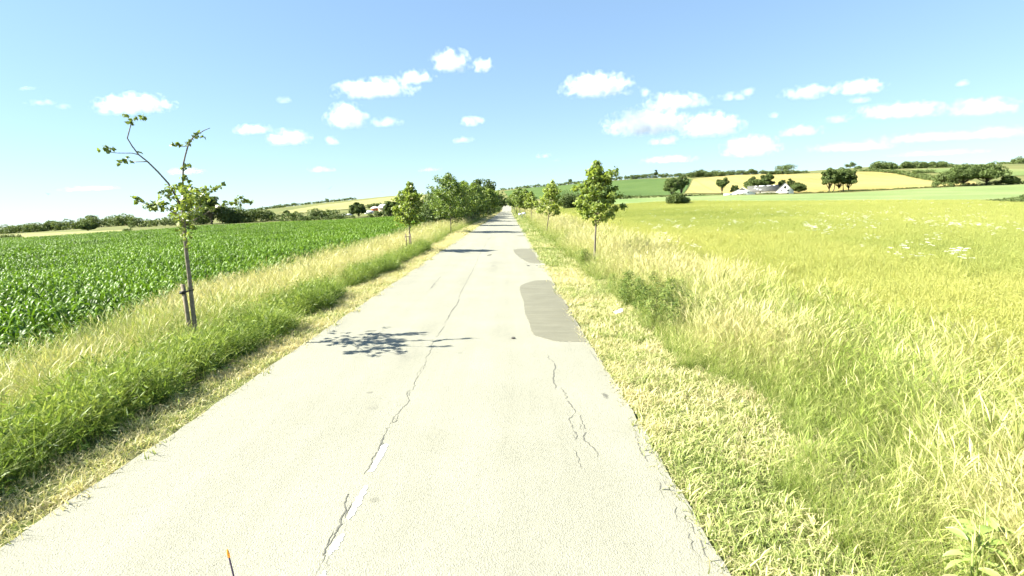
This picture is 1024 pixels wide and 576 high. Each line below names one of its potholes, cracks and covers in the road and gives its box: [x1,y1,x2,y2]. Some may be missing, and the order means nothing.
crack [548,356,598,467]
crack [315,238,490,575]
crack [659,484,720,573]
